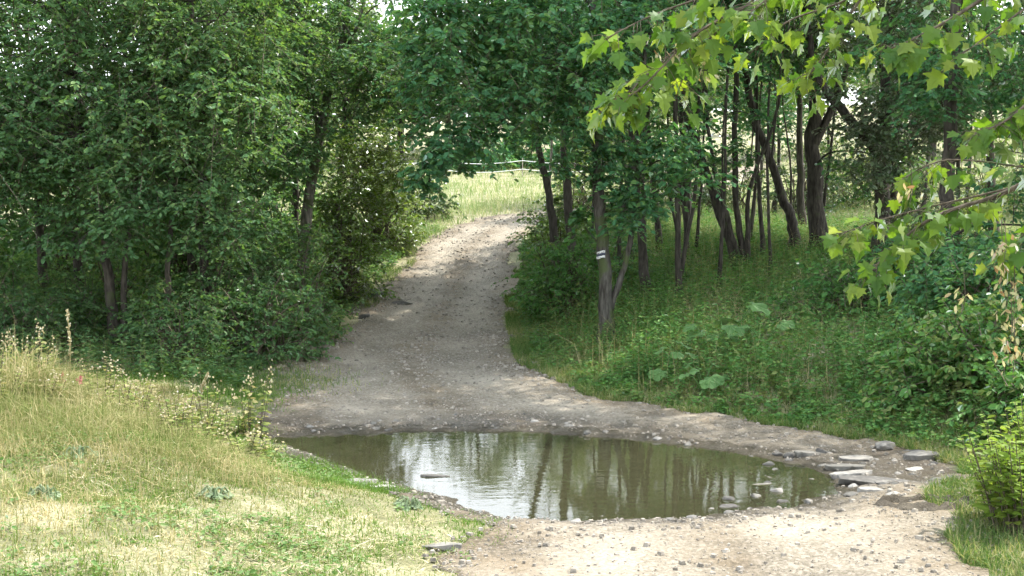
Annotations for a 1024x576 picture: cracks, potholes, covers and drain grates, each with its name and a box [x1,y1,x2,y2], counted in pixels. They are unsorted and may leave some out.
pothole [231,422,869,522]
